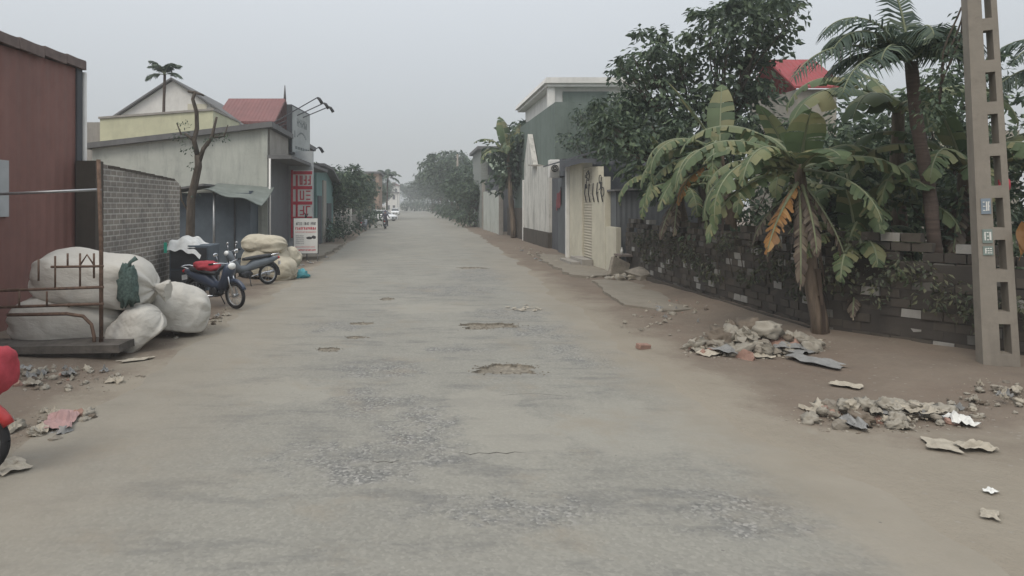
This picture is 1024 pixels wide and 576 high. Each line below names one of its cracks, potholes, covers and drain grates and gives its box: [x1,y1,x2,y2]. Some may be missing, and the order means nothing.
pothole [458,321,529,331]
pothole [468,362,549,375]
